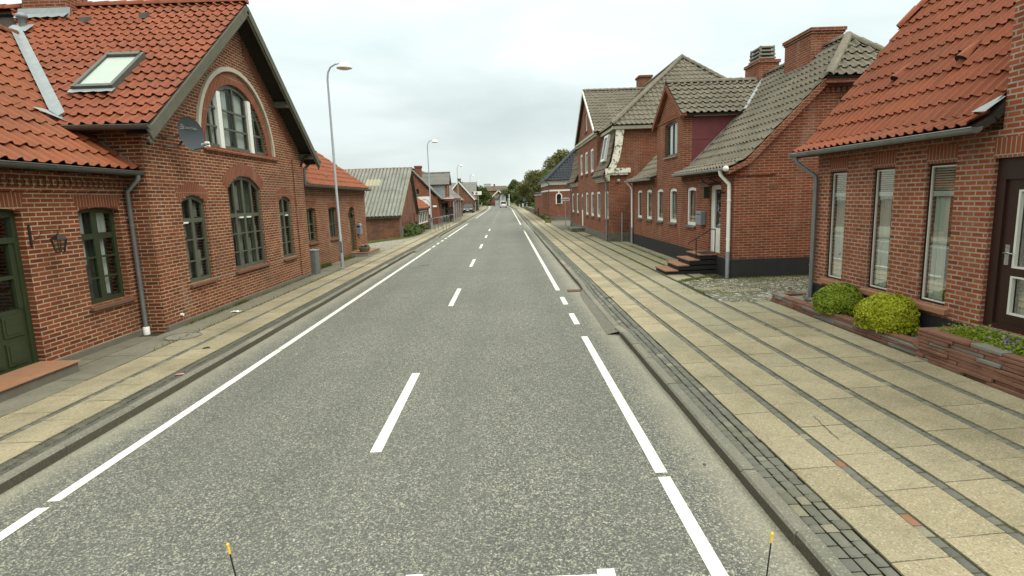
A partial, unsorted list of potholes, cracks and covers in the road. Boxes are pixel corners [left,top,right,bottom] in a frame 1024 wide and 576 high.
manhole cover [163,332,202,341]
